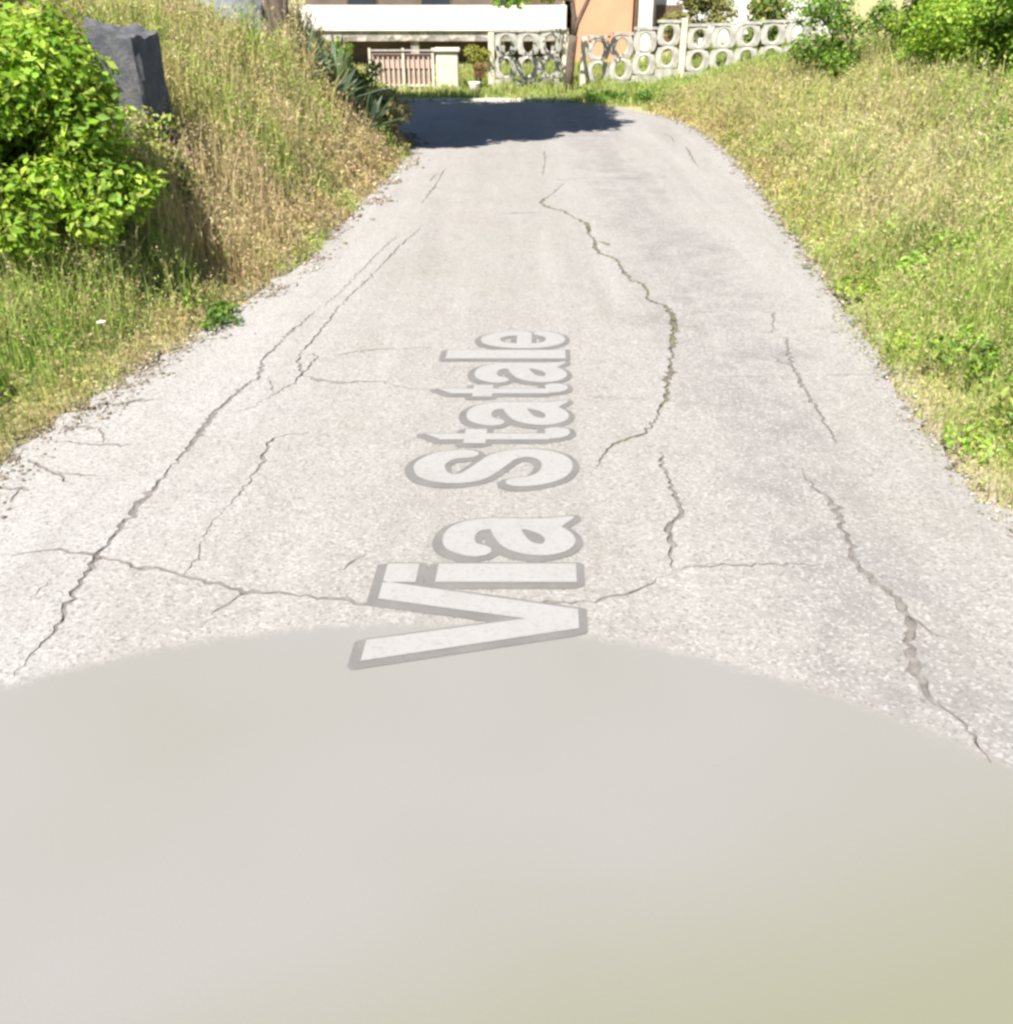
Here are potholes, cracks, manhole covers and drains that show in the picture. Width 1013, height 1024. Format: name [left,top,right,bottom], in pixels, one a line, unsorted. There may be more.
crack [1,151,991,763]
